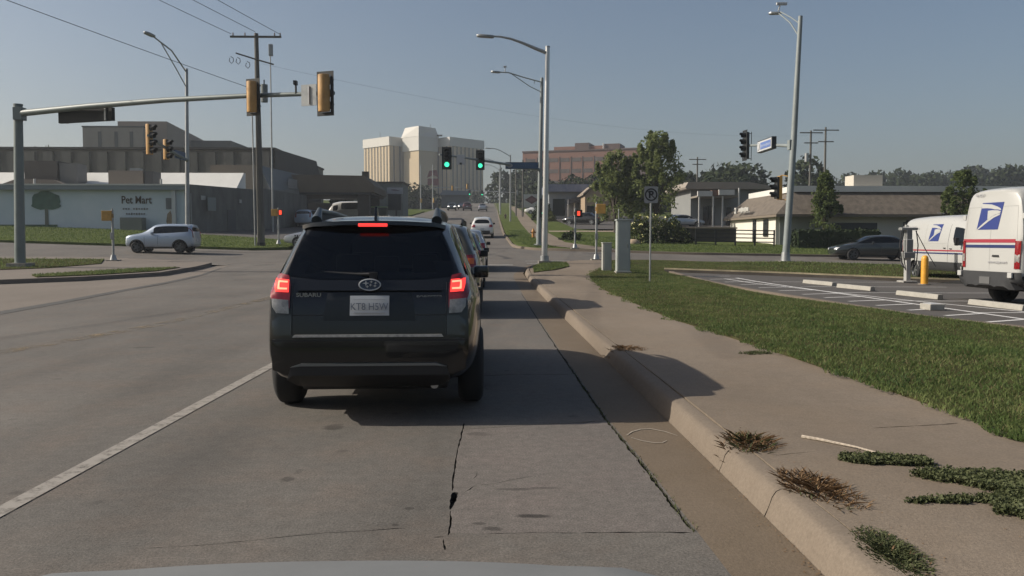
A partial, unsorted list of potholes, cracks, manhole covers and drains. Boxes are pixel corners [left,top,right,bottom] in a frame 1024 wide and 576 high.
crack [443,293,691,550]
